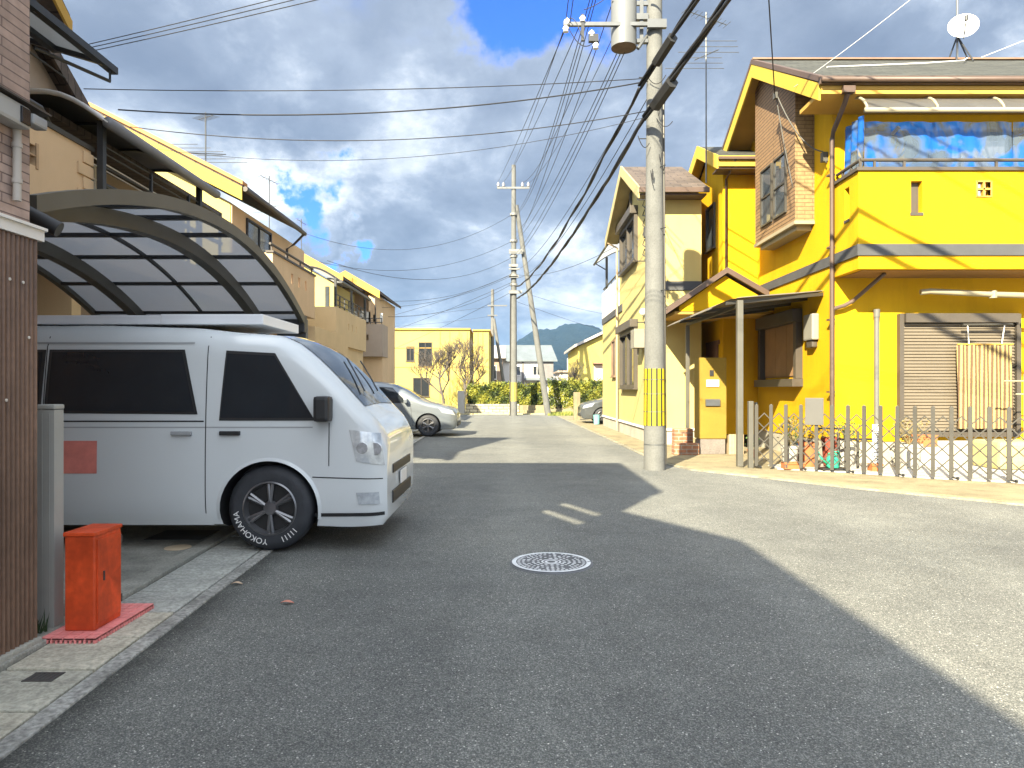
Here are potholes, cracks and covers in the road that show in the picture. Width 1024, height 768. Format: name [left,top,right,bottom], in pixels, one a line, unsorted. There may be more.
manhole cover [510,552,593,574]
drain grate [21,672,66,682]
